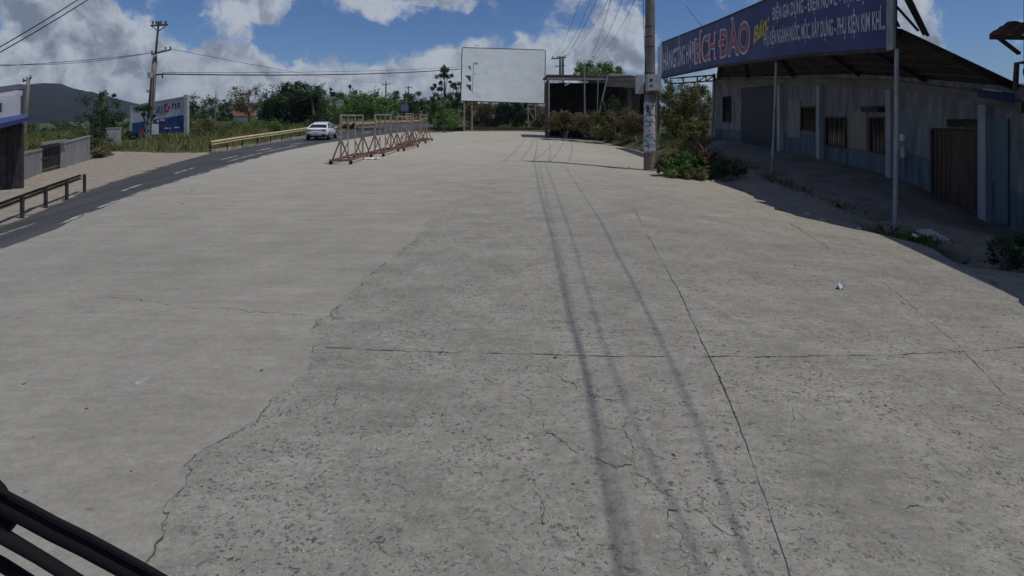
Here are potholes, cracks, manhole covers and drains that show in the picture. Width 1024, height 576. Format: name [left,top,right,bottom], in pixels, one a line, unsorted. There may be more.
crack [145,239,418,563]
crack [544,364,766,549]
